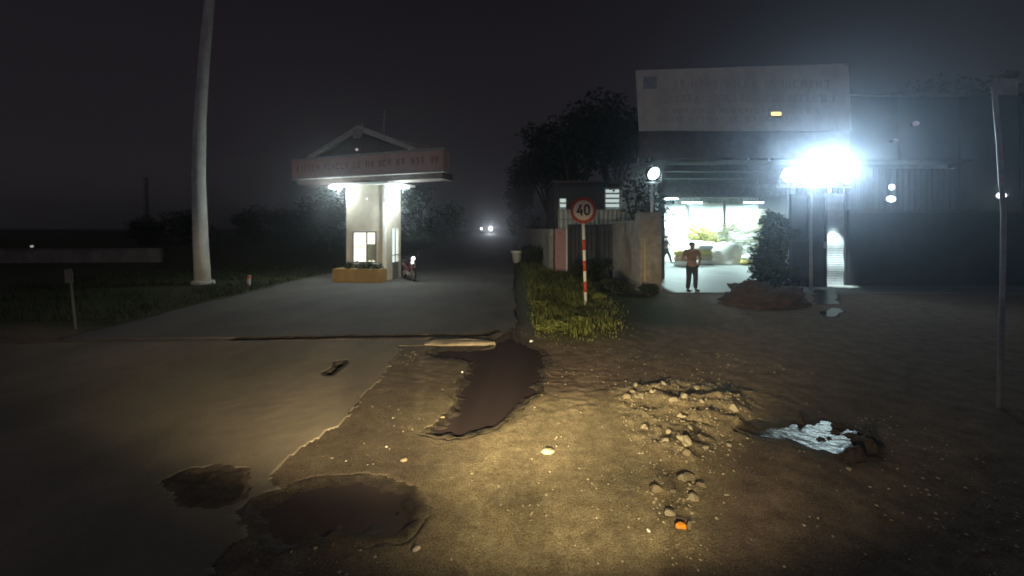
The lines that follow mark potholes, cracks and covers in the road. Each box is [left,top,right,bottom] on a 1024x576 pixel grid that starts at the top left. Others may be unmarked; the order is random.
pothole [234,473,433,557]
pothole [419,328,554,440]
pothole [321,360,348,376]
pothole [161,464,252,509]
pothole [732,415,890,464]
